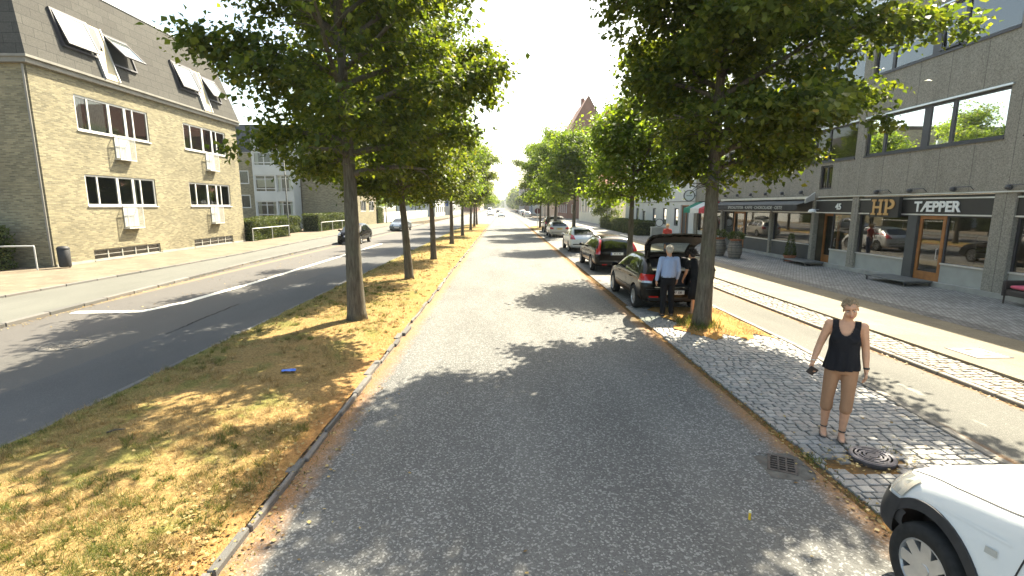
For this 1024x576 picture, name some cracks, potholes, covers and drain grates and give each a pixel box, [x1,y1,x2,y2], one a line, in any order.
manhole cover [848,446,898,471]
drain grate [767,453,799,476]
